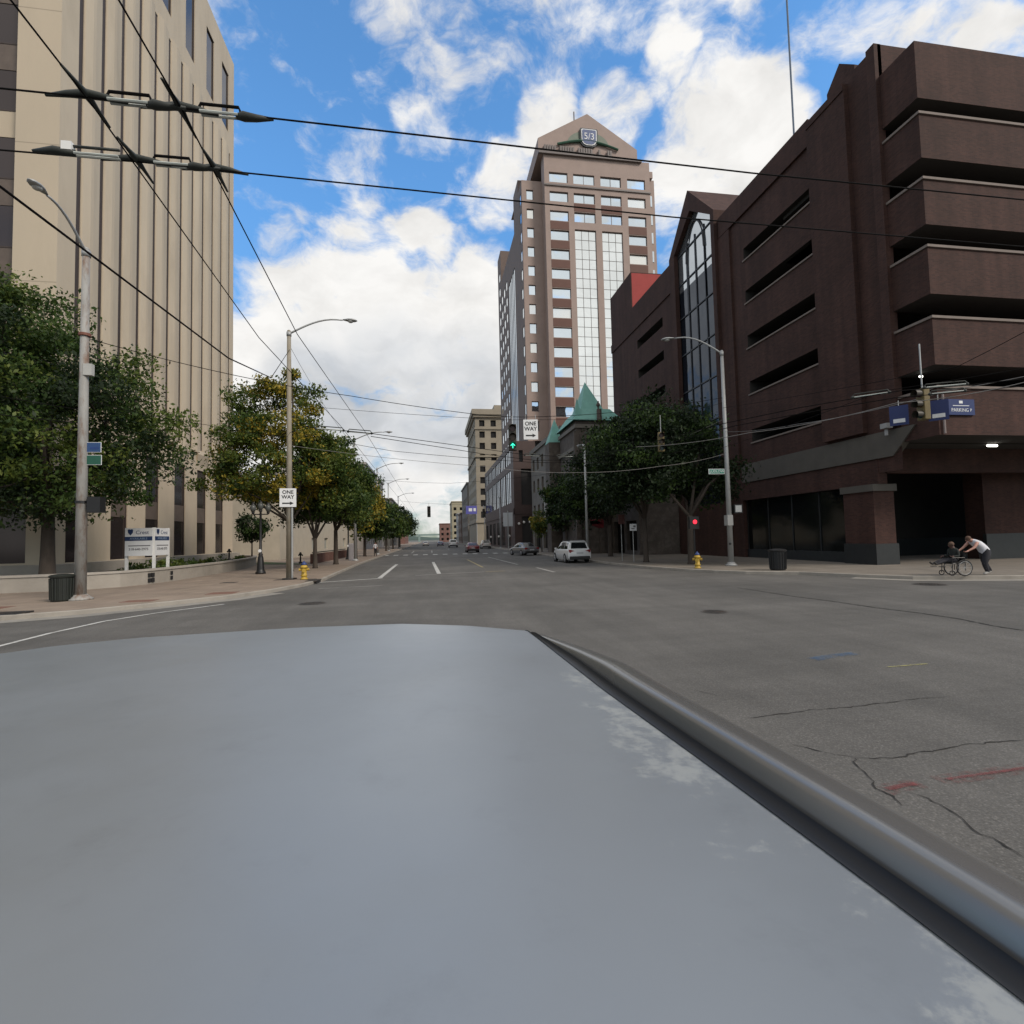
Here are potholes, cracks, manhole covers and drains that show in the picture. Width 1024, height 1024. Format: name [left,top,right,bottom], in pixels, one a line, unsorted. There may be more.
crack [921,795,1022,856]
crack [752,697,934,718]
crack [793,740,1018,805]
